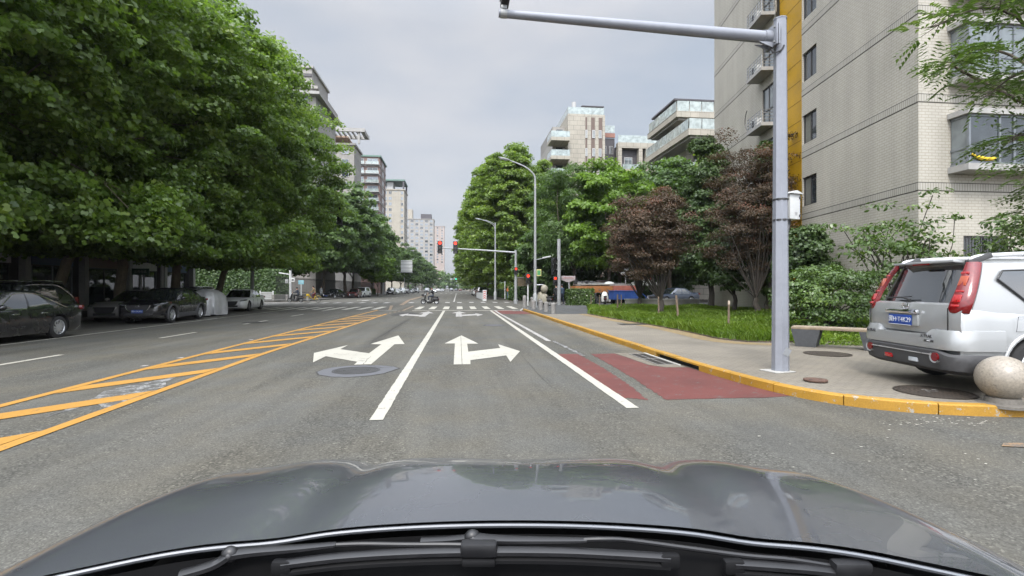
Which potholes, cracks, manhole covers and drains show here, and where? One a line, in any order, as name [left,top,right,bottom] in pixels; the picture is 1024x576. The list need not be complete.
drain grate [630,353,680,365]
manhole cover [316,365,400,378]
manhole cover [893,385,980,400]
